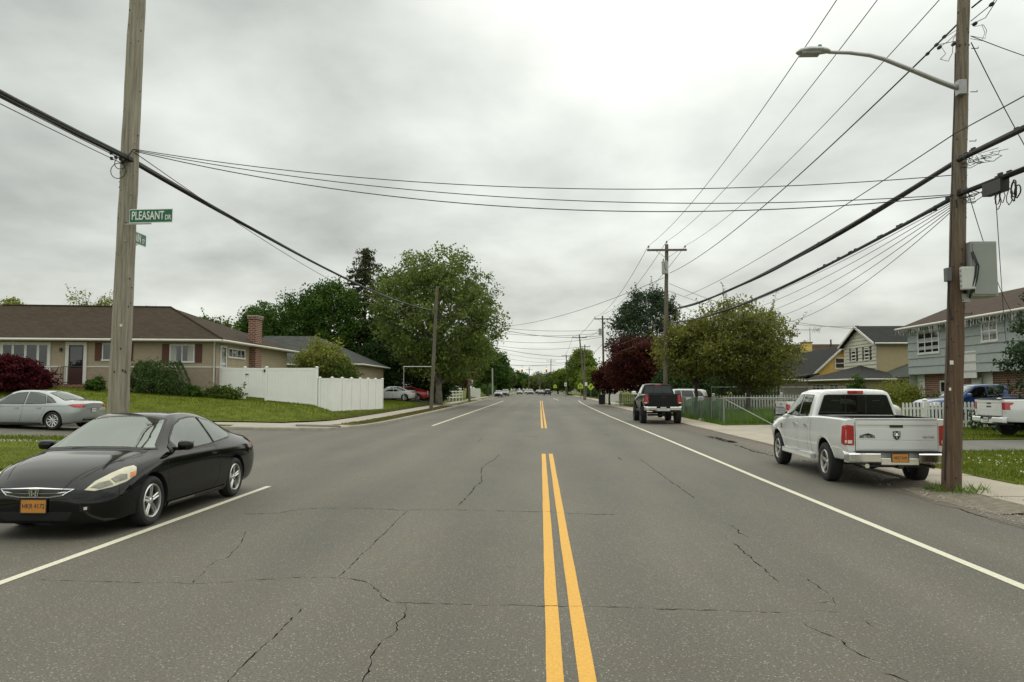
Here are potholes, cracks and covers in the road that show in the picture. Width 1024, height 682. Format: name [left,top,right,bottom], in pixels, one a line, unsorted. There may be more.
crack [264,438,614,515]
crack [42,511,781,682]
crack [805,579,908,682]
